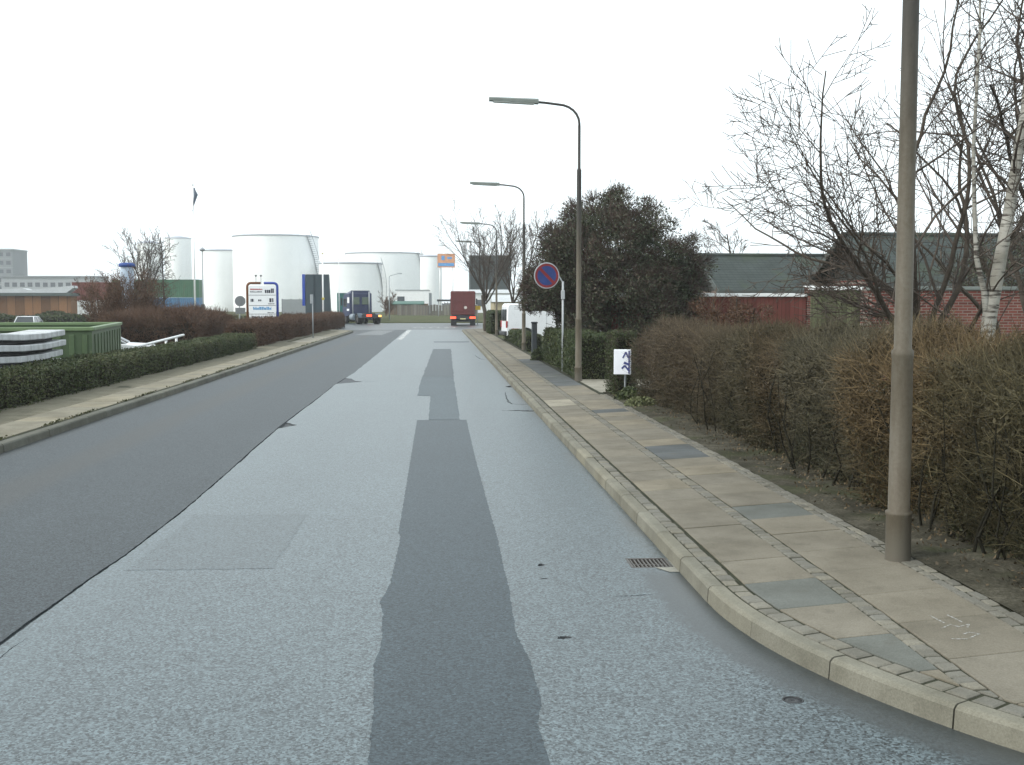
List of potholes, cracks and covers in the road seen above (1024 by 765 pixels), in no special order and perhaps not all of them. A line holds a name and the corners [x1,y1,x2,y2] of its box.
manhole cover [782,696,804,704]
drain grate [625,558,679,572]
